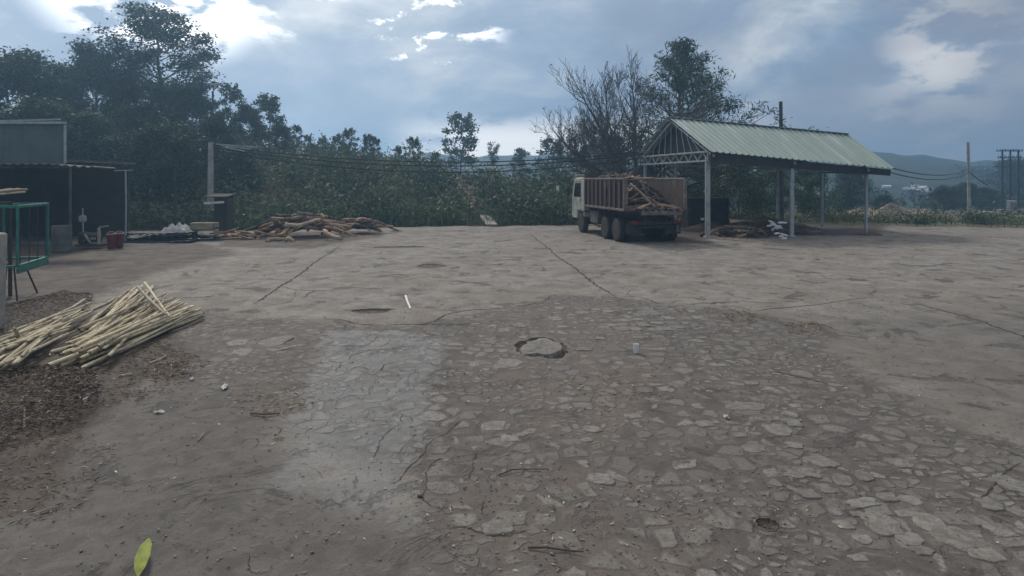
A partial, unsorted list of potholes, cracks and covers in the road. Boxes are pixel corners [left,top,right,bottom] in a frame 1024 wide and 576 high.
crack [907,302,1024,336]
crack [396,421,530,536]
crack [529,233,903,311]
crack [326,294,557,382]
crack [253,244,342,305]
crack [981,463,1020,502]
pothole [752,517,782,532]
